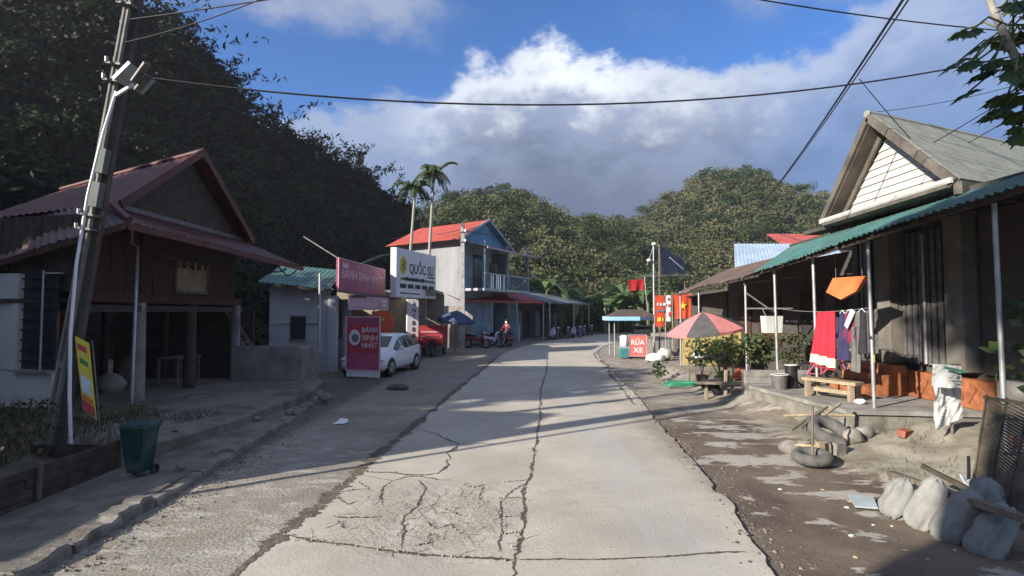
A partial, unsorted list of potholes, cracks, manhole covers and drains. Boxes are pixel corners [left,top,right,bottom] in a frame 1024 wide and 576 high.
crack [229,347,745,576]
